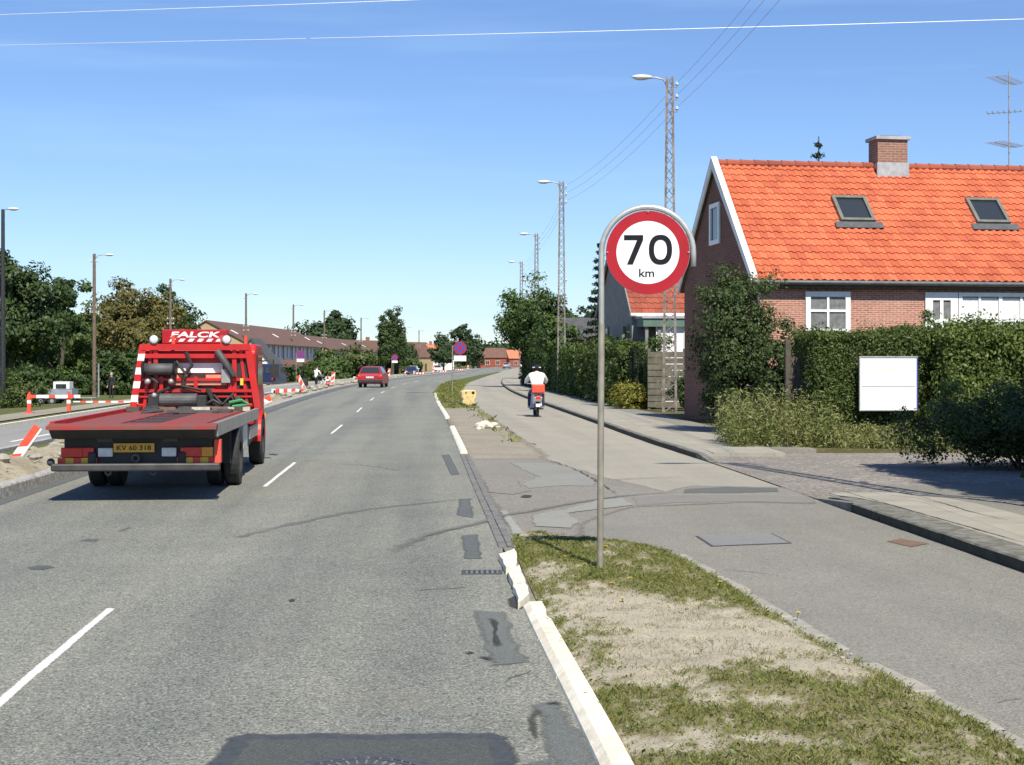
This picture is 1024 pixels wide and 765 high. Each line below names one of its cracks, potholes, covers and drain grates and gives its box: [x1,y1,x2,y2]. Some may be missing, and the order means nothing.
manhole cover [889,538,927,547]
manhole cover [297,754,432,765]
manhole cover [696,533,791,546]
